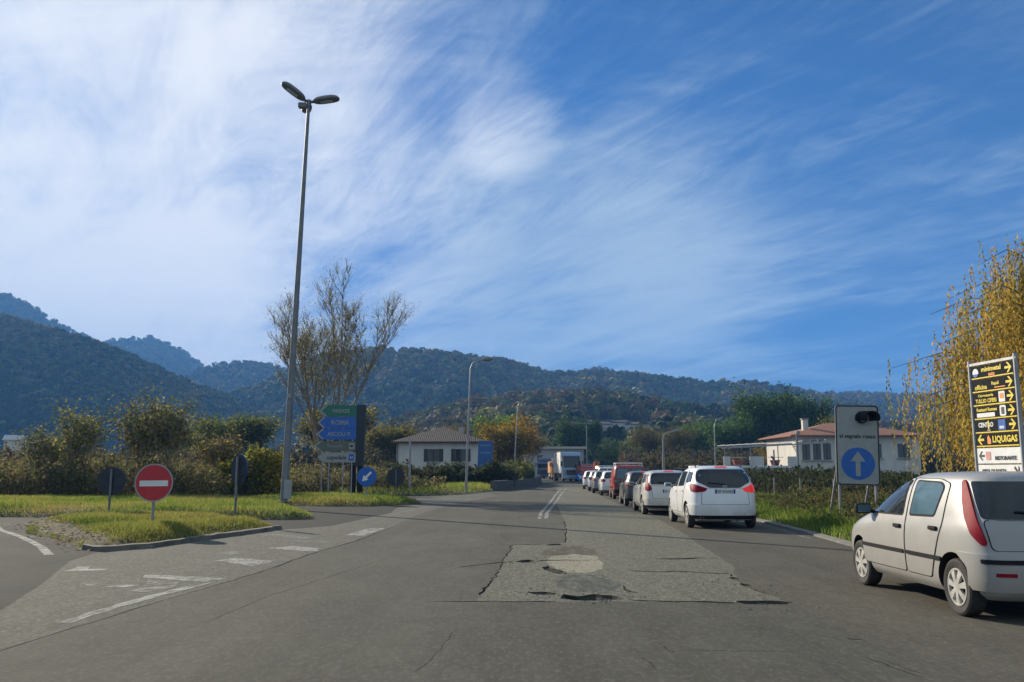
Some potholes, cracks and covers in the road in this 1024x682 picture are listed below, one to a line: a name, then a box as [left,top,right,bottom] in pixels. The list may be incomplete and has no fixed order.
crack [437,544,766,603]
